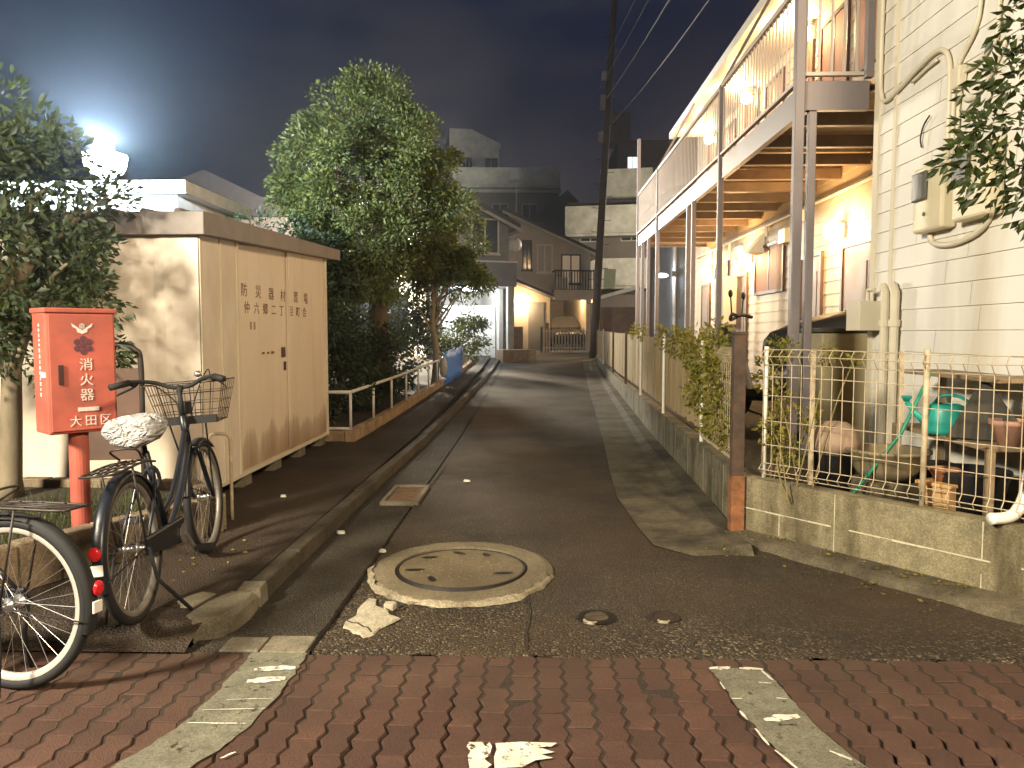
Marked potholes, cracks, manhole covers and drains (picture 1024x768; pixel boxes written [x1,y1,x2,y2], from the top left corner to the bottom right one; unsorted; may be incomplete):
drain grate [379,484,430,507]
manhole cover [576,609,617,625]
manhole cover [647,610,680,624]
manhole cover [367,542,555,608]
